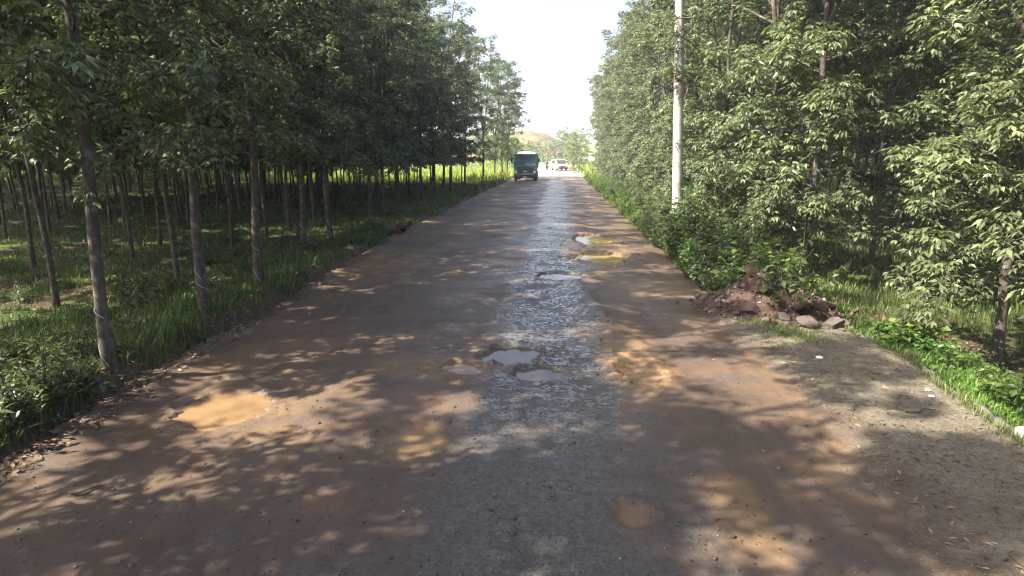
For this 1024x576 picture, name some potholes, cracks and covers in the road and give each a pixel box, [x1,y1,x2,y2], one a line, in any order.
pothole [426,354,495,375]
pothole [506,360,573,381]
pothole [563,250,635,266]
pothole [533,270,588,281]
pothole [472,342,549,366]
pothole [570,232,623,247]
